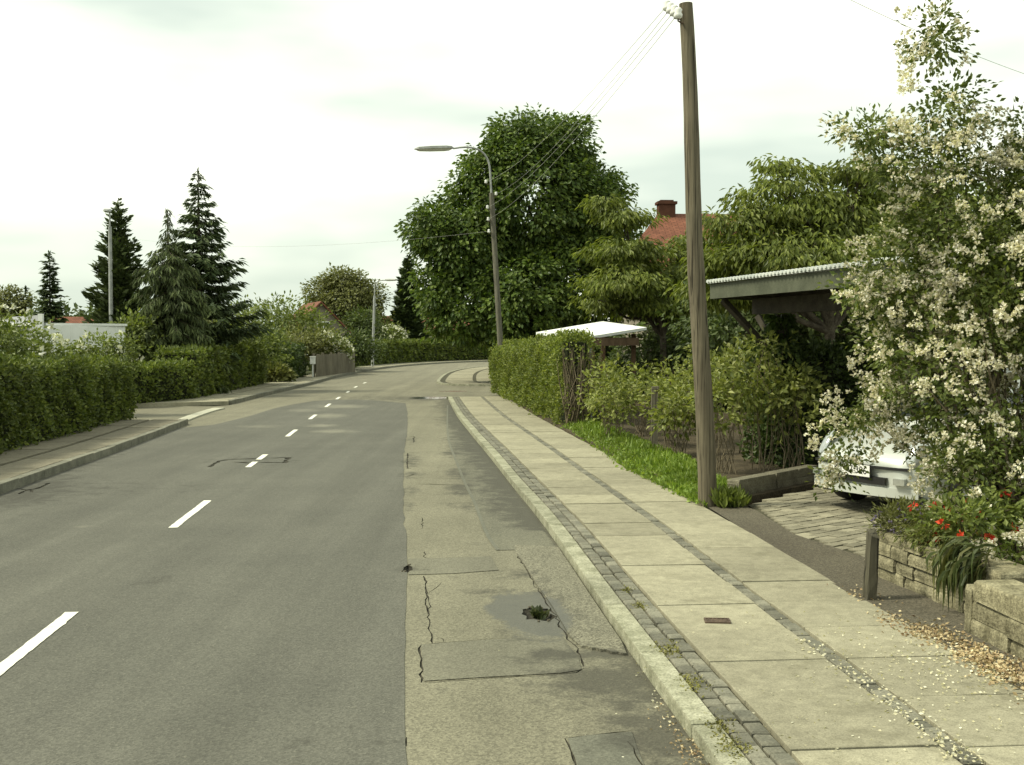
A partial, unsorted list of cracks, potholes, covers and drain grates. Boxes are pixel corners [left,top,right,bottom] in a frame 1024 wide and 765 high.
crack [418,556,584,683]
pothole [522,606,557,622]
